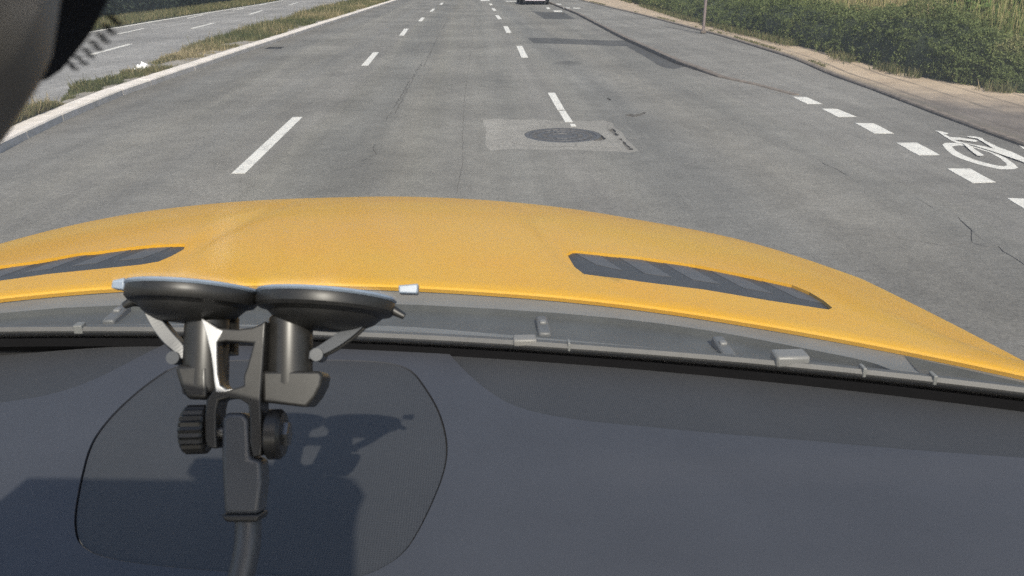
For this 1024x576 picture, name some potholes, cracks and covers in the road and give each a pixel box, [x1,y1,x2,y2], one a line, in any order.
crack [864,218,1024,265]
manhole cover [524,128,601,143]
crack [386,21,447,120]
